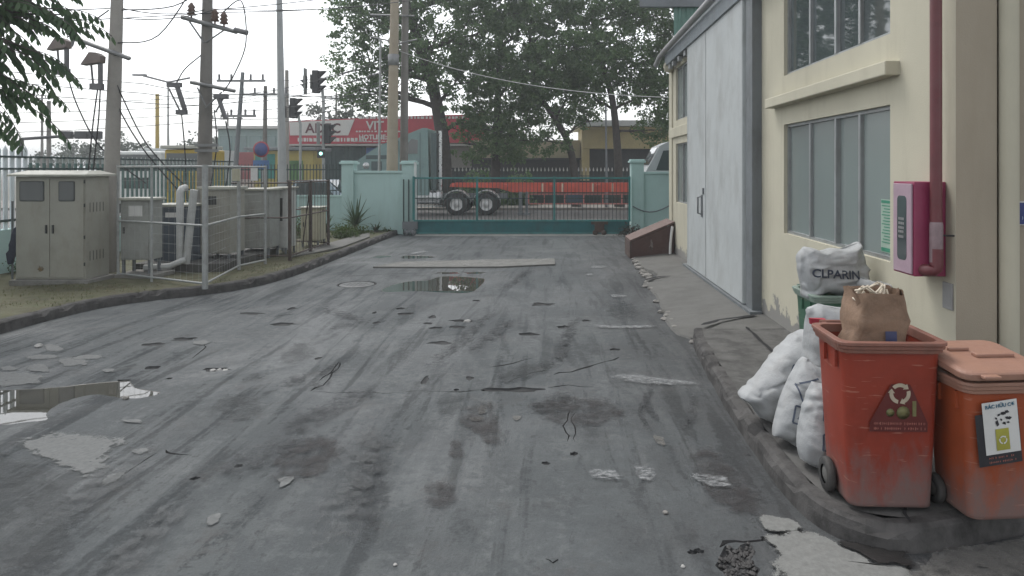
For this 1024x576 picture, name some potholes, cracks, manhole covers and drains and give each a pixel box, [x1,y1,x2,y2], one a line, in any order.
pothole [715,543,760,576]
crack [493,357,619,388]
